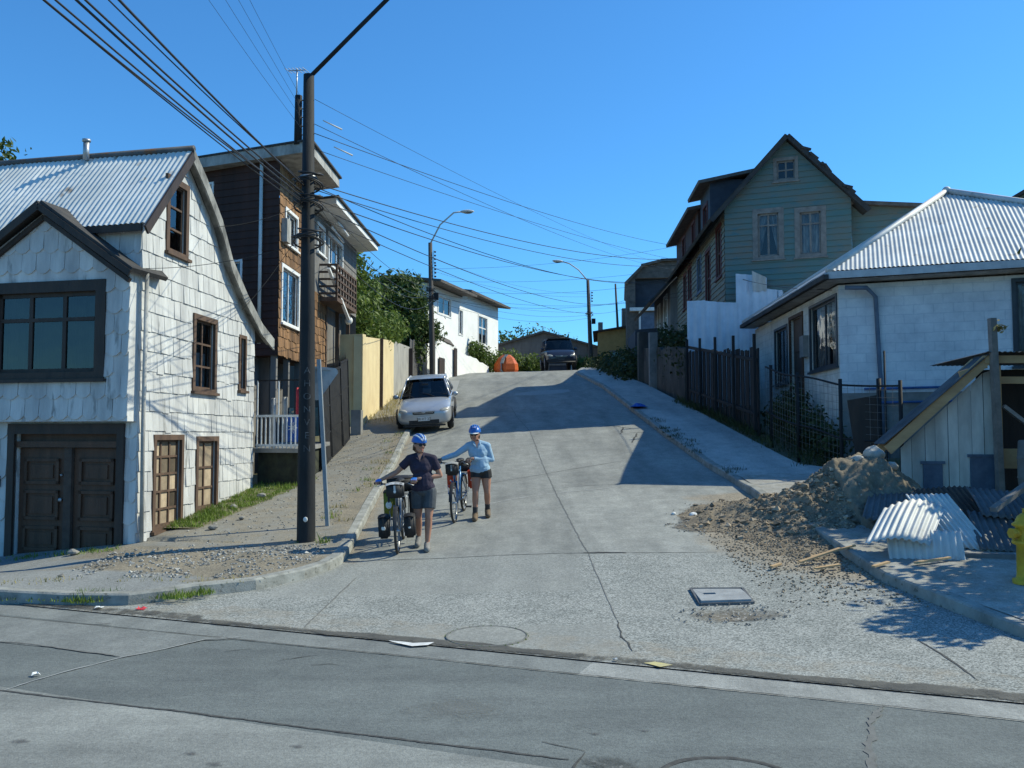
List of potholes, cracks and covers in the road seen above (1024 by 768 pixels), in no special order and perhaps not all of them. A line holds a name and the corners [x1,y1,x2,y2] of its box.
crack [862,705,883,768]
manhole cover [689,587,755,606]
manhole cover [661,756,782,768]
manhole cover [445,625,528,646]
